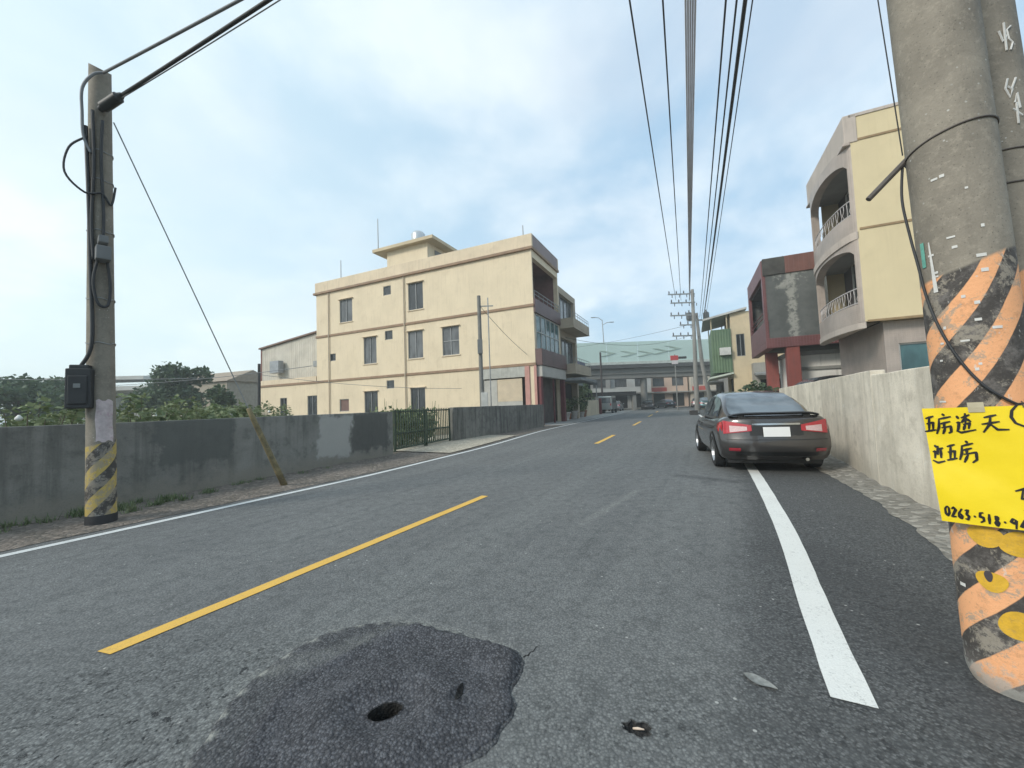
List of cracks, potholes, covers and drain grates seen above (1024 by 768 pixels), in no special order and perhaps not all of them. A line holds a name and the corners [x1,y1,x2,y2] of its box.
pothole [366,701,404,721]
pothole [621,719,653,738]
